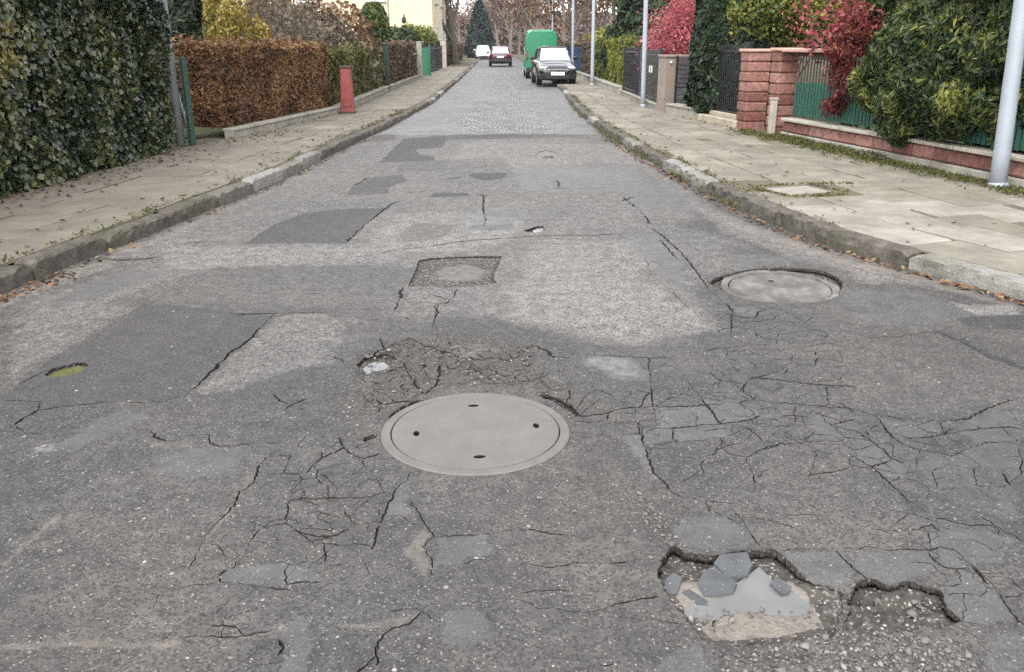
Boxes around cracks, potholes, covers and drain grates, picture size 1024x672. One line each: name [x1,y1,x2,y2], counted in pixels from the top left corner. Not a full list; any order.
crack [6,312,324,434]
pothole [356,352,397,375]
manhole cover [719,270,841,312]
manhole cover [380,393,570,476]
crack [357,609,435,672]
pothole [657,545,844,647]
pothole [44,362,89,377]
pothole [844,578,962,638]
crack [150,431,620,591]
crack [346,191,1024,624]
